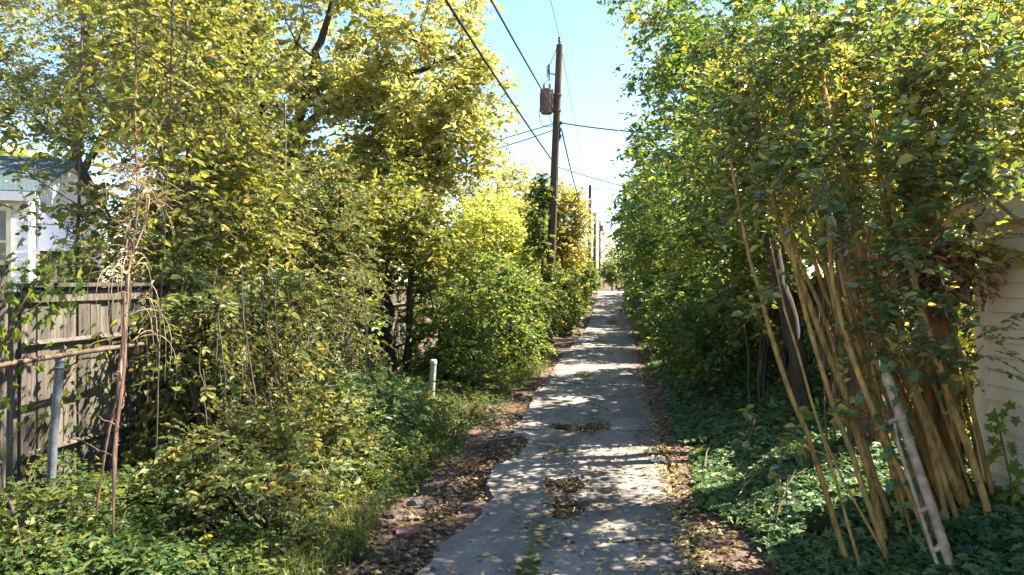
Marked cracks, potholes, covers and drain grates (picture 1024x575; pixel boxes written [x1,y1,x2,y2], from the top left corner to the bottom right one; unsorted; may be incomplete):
pothole [542,477,585,493]
pothole [549,495,586,519]
crack [552,380,640,411]
